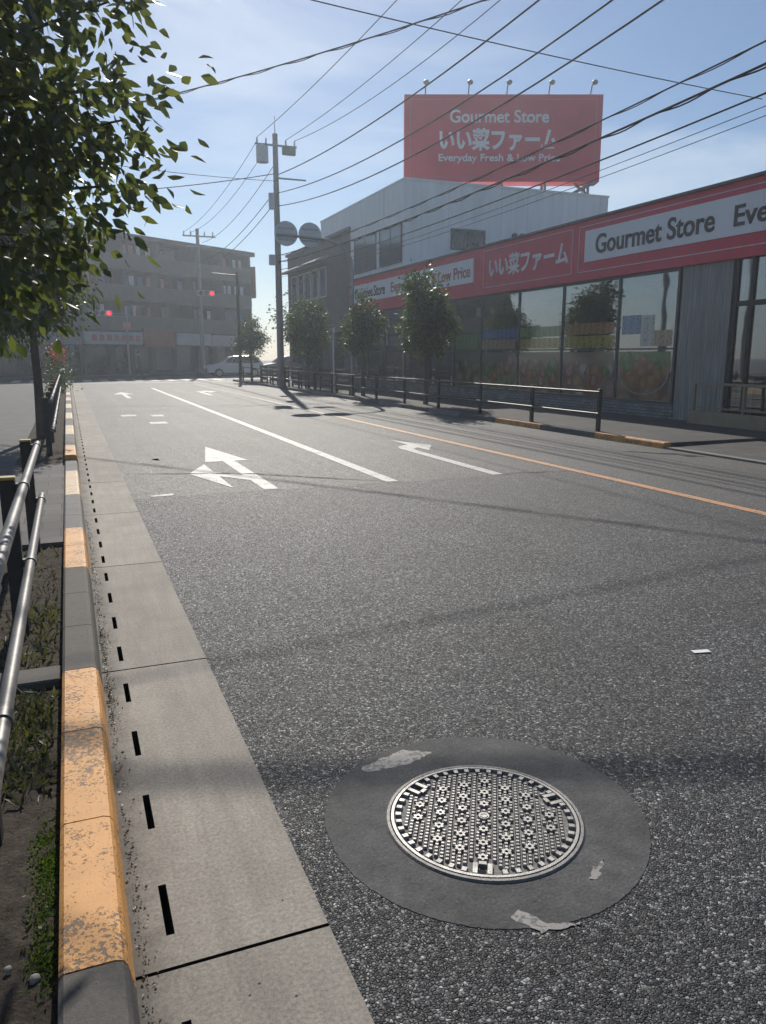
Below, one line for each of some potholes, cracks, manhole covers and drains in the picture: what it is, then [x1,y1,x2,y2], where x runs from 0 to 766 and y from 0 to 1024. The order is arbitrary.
manhole cover [385,765,586,884]
